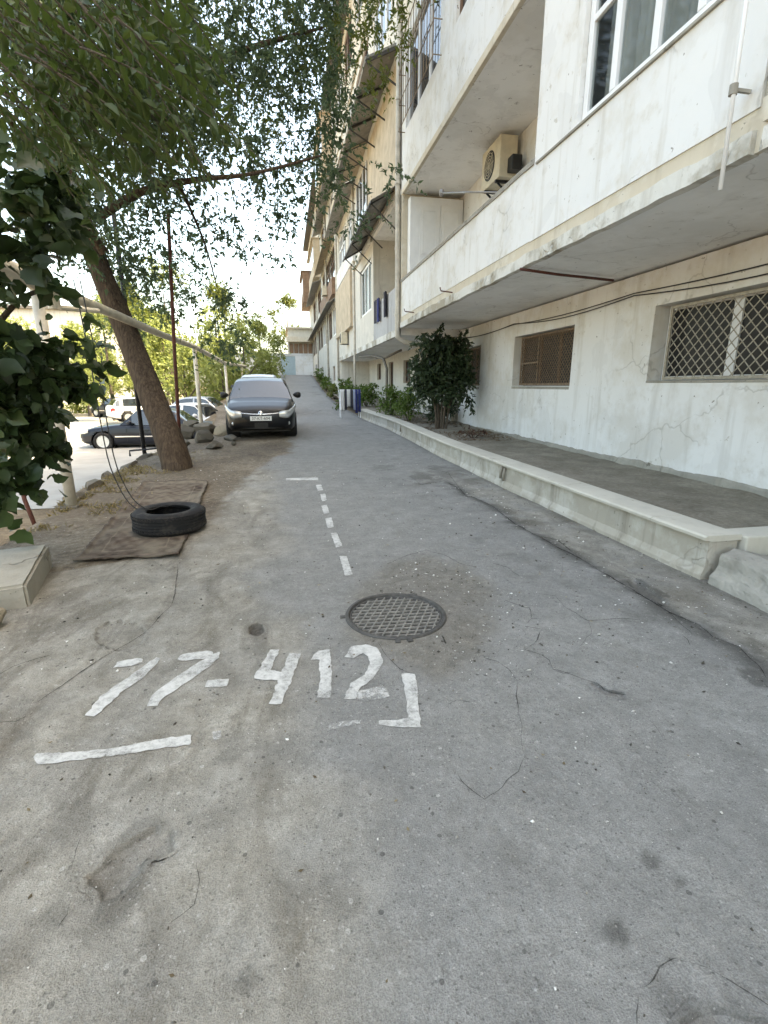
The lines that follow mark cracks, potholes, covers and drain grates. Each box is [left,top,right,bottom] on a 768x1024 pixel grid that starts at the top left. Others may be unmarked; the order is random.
pothole [75,819,186,911]
crack [636,958,768,1020]
crack [449,658,523,799]
manhole cover [340,593,447,643]
crack [59,838,200,925]
crack [494,563,638,680]
